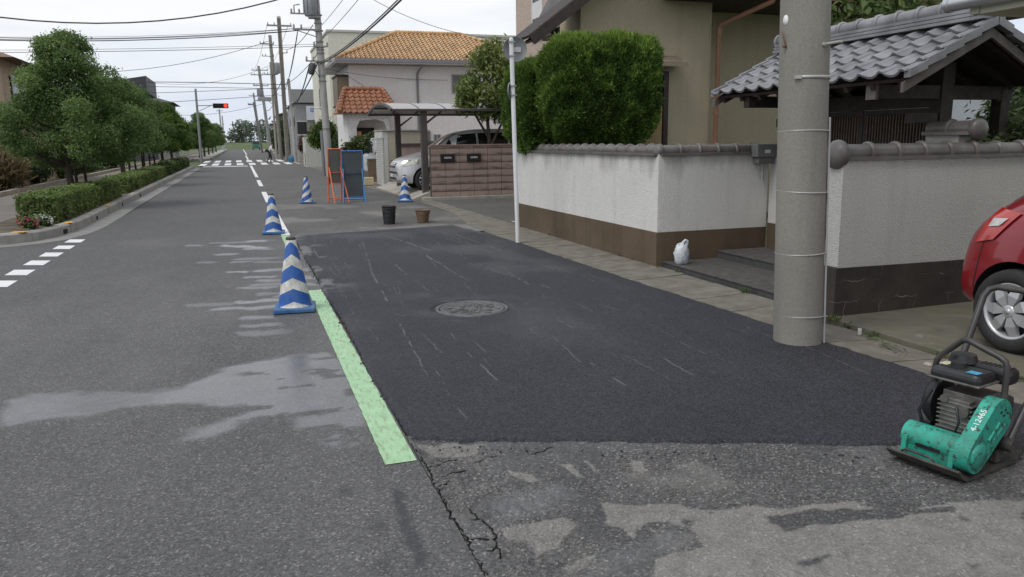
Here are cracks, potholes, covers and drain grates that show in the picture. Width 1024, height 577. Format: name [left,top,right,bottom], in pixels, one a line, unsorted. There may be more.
manhole cover [436,300,509,317]
crack [412,446,553,575]
